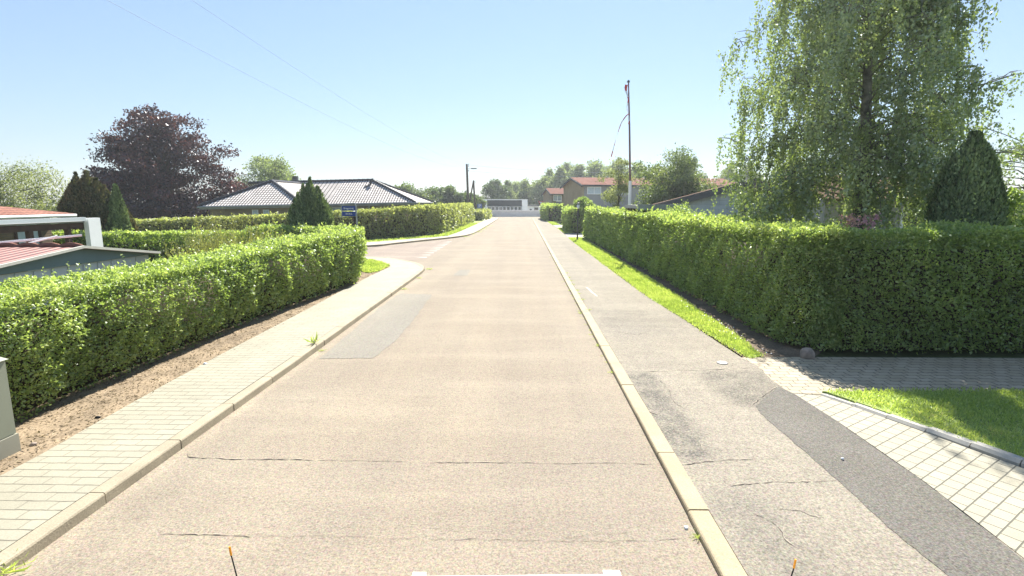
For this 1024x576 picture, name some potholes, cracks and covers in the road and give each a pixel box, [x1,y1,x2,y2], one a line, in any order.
crack [167,532,682,542]
crack [732,480,834,544]
crack [187,454,640,464]
